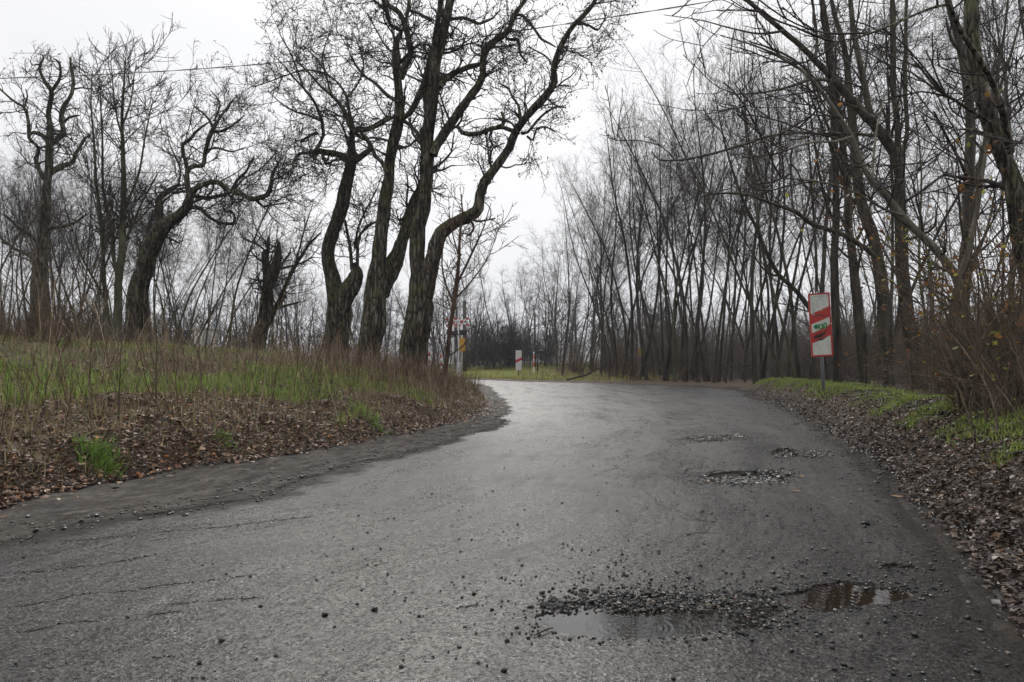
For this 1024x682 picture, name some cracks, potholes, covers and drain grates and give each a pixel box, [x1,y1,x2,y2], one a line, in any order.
crack [21,555,152,573]
pothole [707,470,792,482]
pothole [534,592,786,639]
crack [77,517,308,541]
pothole [780,580,918,612]
